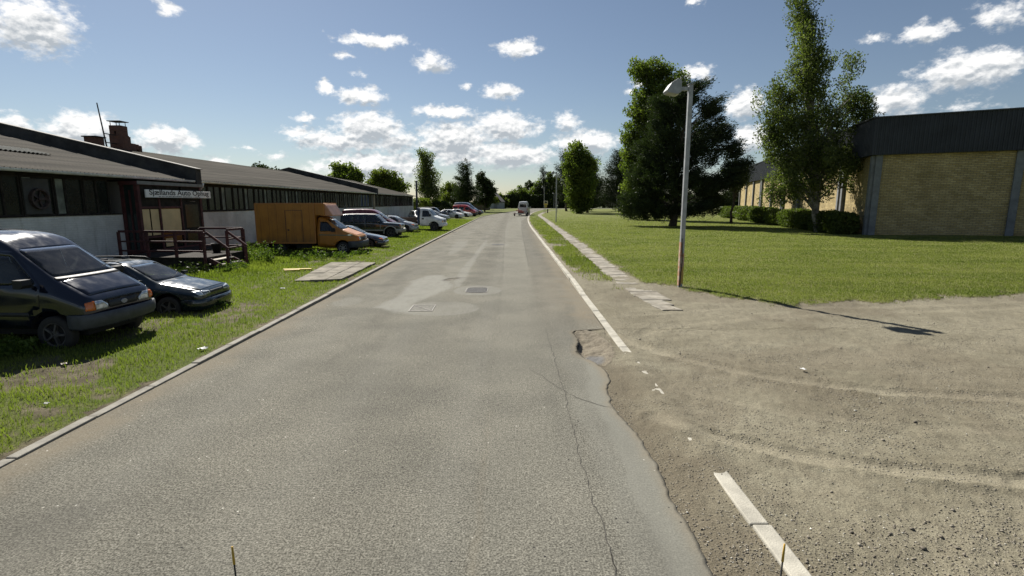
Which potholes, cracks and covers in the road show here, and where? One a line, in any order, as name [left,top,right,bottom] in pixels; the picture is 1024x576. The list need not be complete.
pothole [574,330,615,366]
crack [533,335,621,576]
